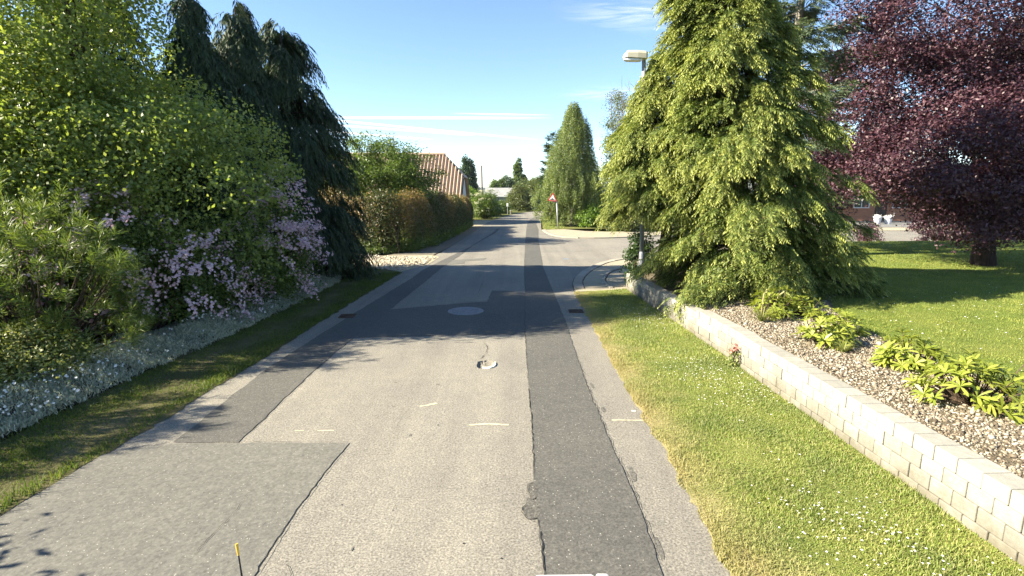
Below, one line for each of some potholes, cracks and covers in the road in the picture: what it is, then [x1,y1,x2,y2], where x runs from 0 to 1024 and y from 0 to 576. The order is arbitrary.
manhole cover [448,307,484,315]
